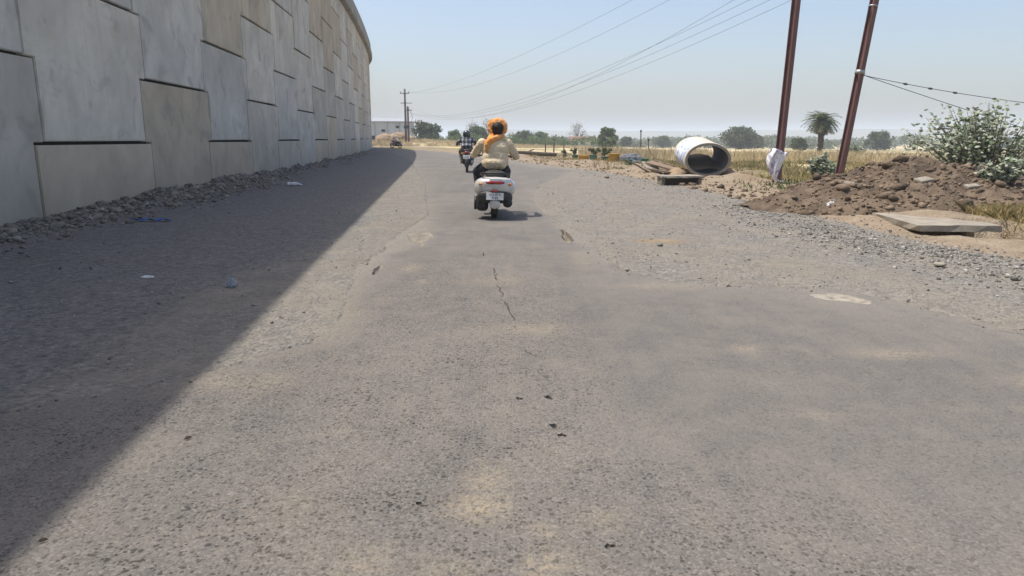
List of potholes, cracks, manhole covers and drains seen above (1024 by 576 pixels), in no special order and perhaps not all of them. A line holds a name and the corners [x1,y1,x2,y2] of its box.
crack [483,253,540,374]
